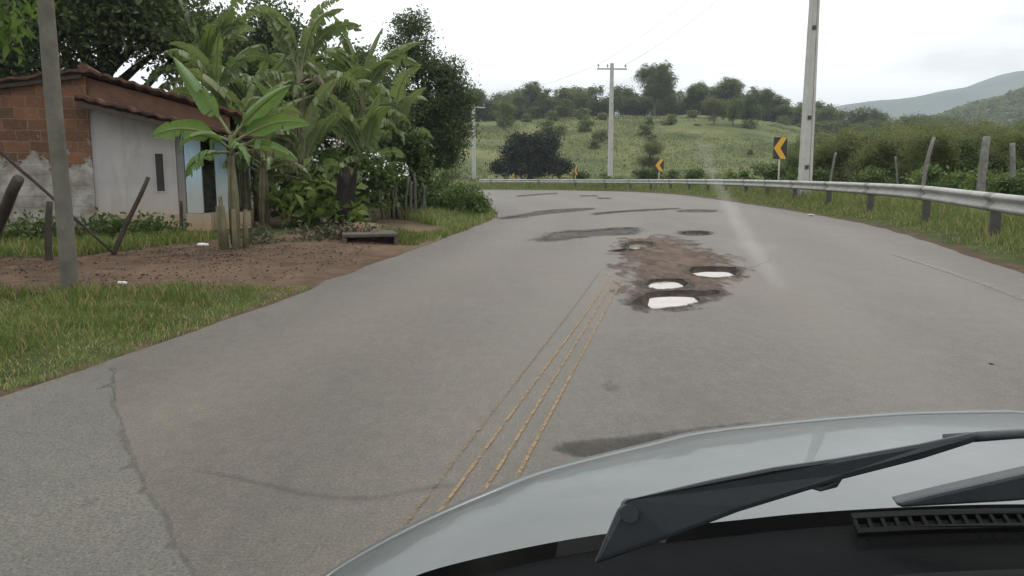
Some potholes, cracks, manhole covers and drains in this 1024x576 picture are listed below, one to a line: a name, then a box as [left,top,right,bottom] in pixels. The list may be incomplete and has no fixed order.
pothole [684,266,744,278]
pothole [610,241,655,252]
pothole [639,277,692,289]
pothole [621,289,726,309]
